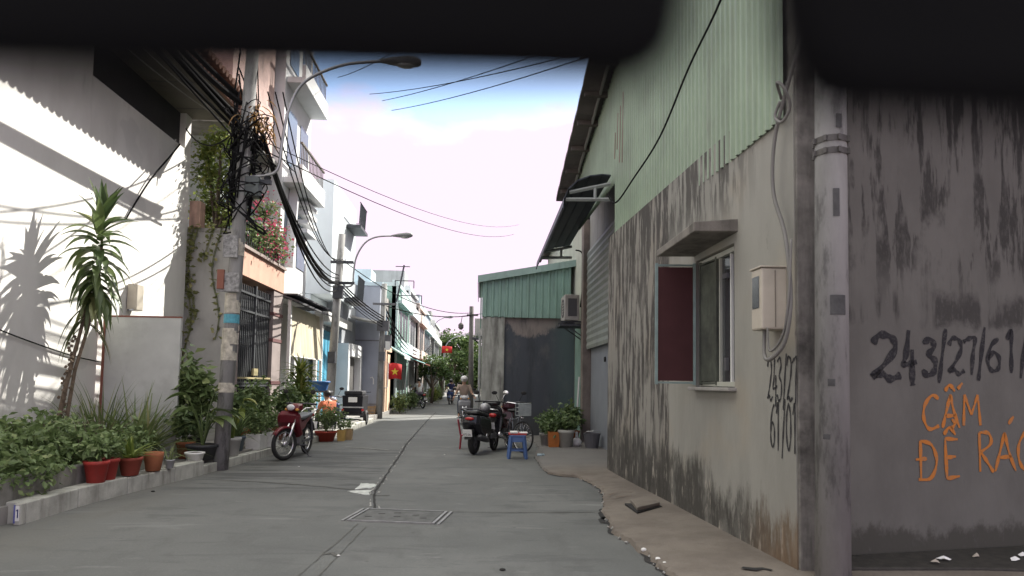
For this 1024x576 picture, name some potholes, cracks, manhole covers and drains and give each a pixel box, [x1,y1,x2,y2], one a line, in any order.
manhole cover [341,508,453,525]
